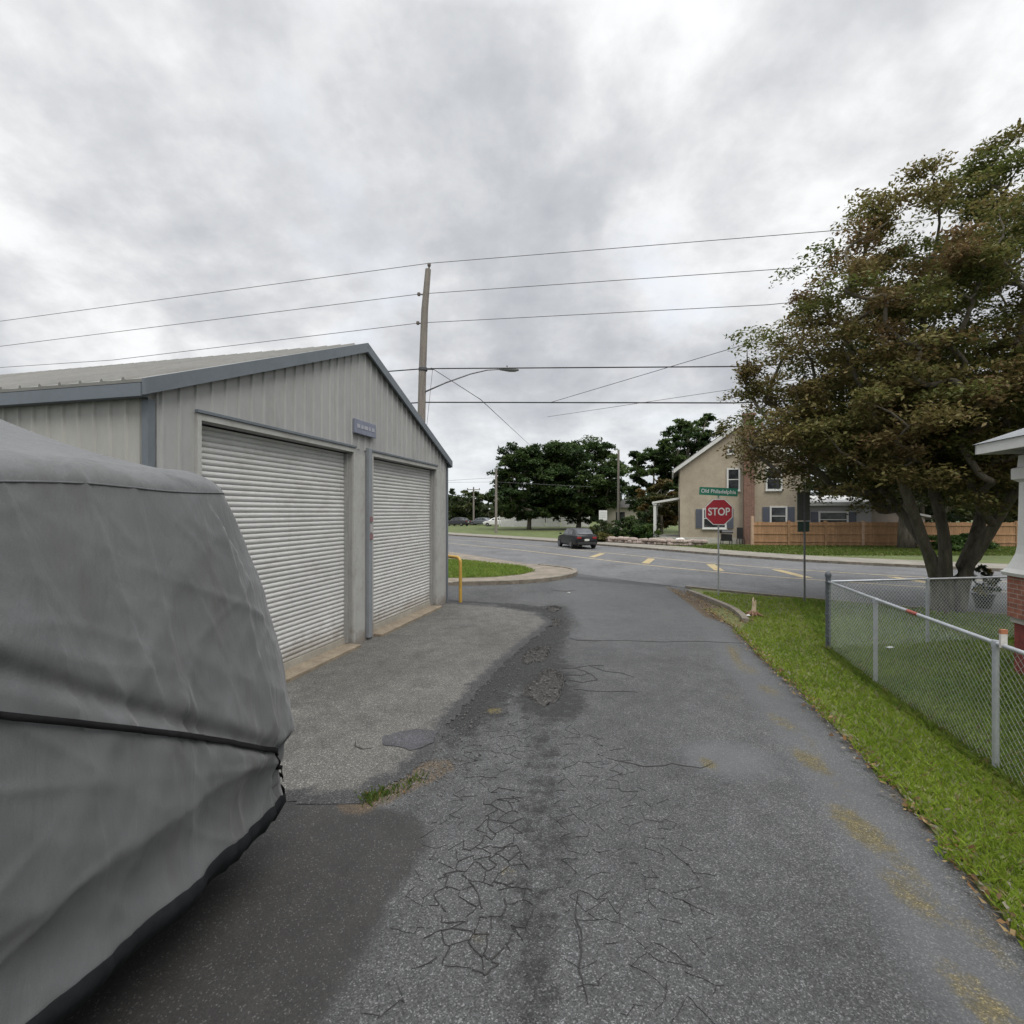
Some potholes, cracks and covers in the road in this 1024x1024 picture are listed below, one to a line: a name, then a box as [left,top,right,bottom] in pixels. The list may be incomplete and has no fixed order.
crack [360,718,534,1019]
pothole [521,646,550,664]
crack [554,725,724,1024]
pothole [521,668,565,706]
crack [564,665,630,692]
